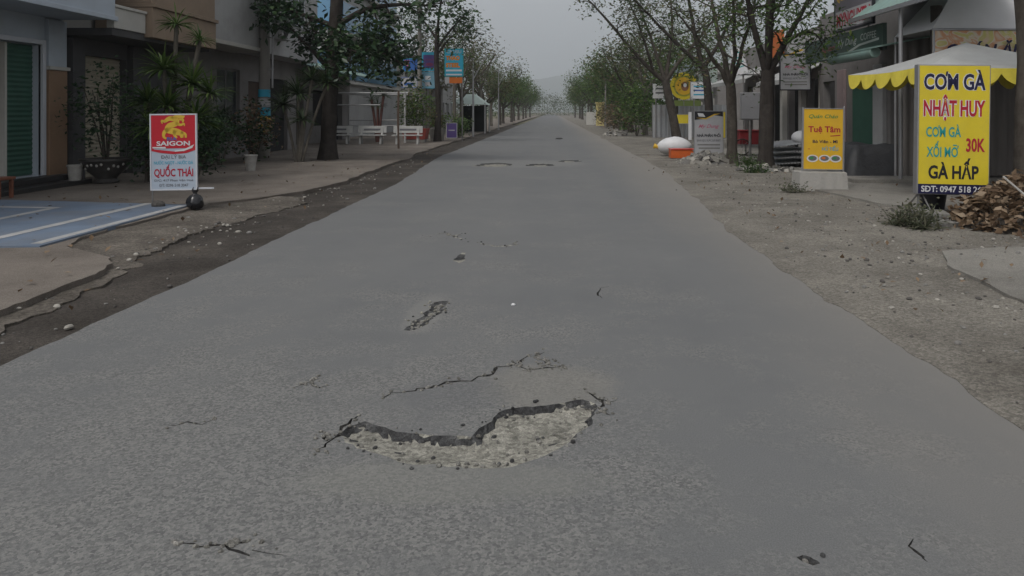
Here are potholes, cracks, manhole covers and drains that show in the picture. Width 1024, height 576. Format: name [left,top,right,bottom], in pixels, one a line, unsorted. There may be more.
crack [292,374,328,388]
pothole [797,552,826,565]
pothole [342,396,603,470]
crack [165,416,217,429]
crack [908,539,926,561]
crack [422,231,519,247]
crack [171,533,281,556]
crack [381,348,567,399]
pothole [404,301,450,331]
